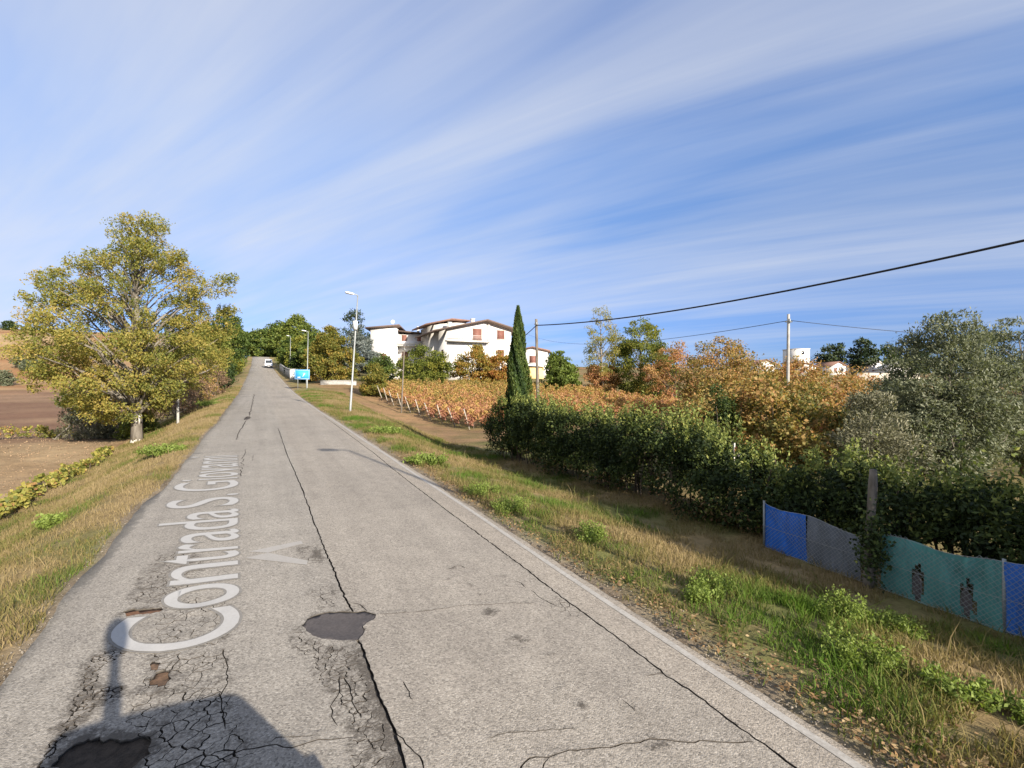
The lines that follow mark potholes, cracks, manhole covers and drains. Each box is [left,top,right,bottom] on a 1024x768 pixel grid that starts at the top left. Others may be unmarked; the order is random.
crack [37,429,424,768]
crack [236,395,255,477]
pothole [148,670,171,688]
pothole [50,735,151,768]
pothole [301,611,376,641]
pothole [121,607,163,616]
